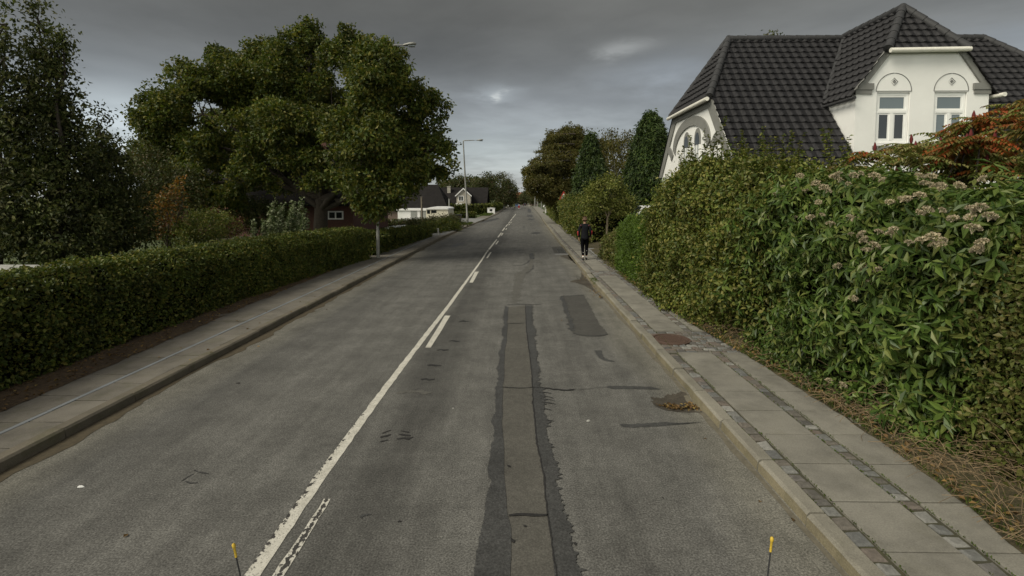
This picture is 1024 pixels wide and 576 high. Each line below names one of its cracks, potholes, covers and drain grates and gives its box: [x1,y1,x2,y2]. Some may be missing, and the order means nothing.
manhole cover [652,334,691,346]
